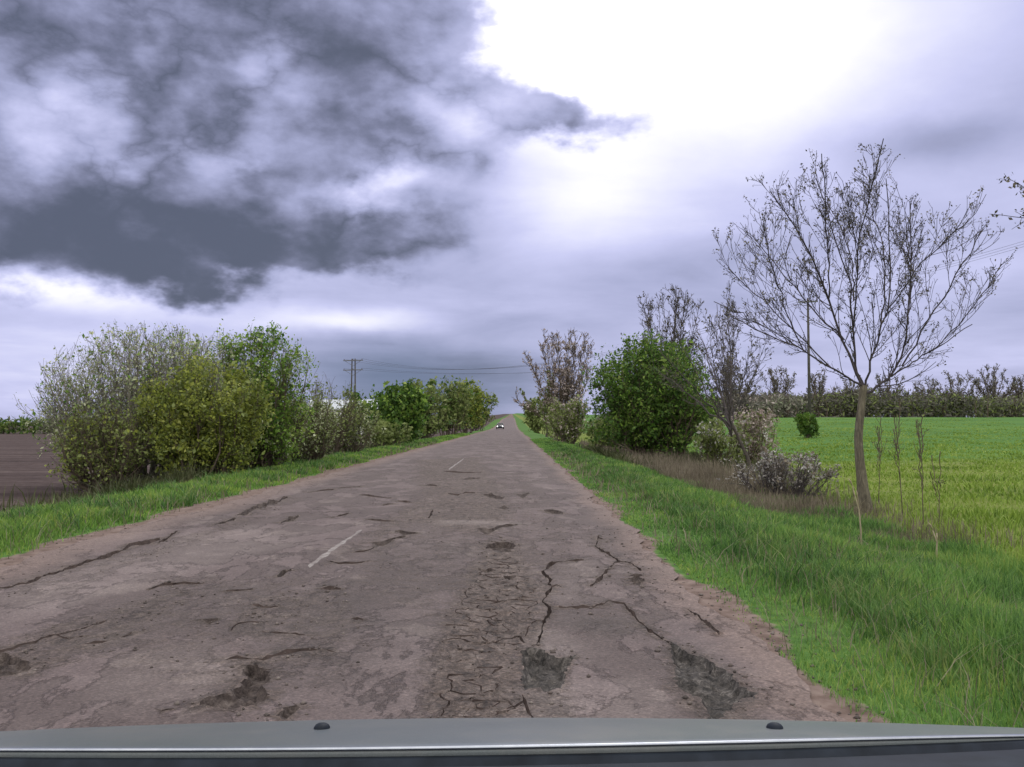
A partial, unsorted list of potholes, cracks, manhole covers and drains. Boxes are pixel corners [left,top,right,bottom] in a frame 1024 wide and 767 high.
pothole [200,665,271,709]
pothole [520,647,576,692]
crack [0,620,132,653]
pothole [0,652,31,676]
crack [687,609,719,634]
pothole [485,542,516,552]
crack [439,535,669,718]
pothole [669,642,758,719]
crack [0,531,178,588]
